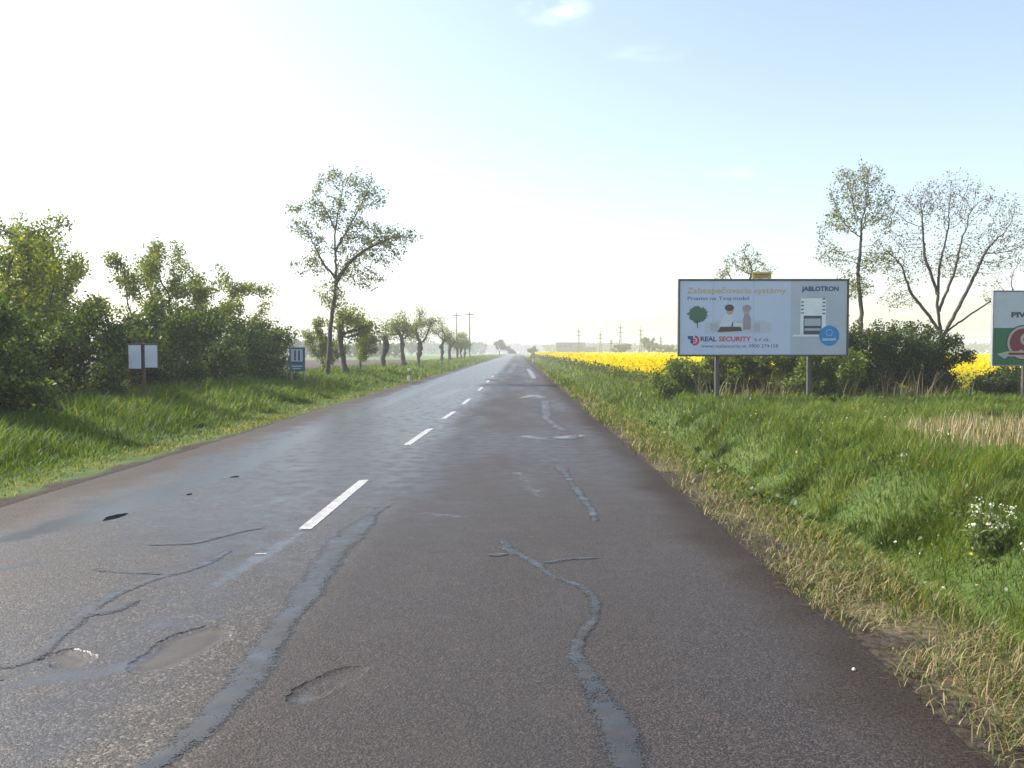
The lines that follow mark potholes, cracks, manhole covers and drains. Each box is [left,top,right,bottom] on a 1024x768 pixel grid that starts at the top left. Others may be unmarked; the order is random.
pothole [285,665,370,706]
pothole [37,648,98,670]
pothole [125,625,236,673]
